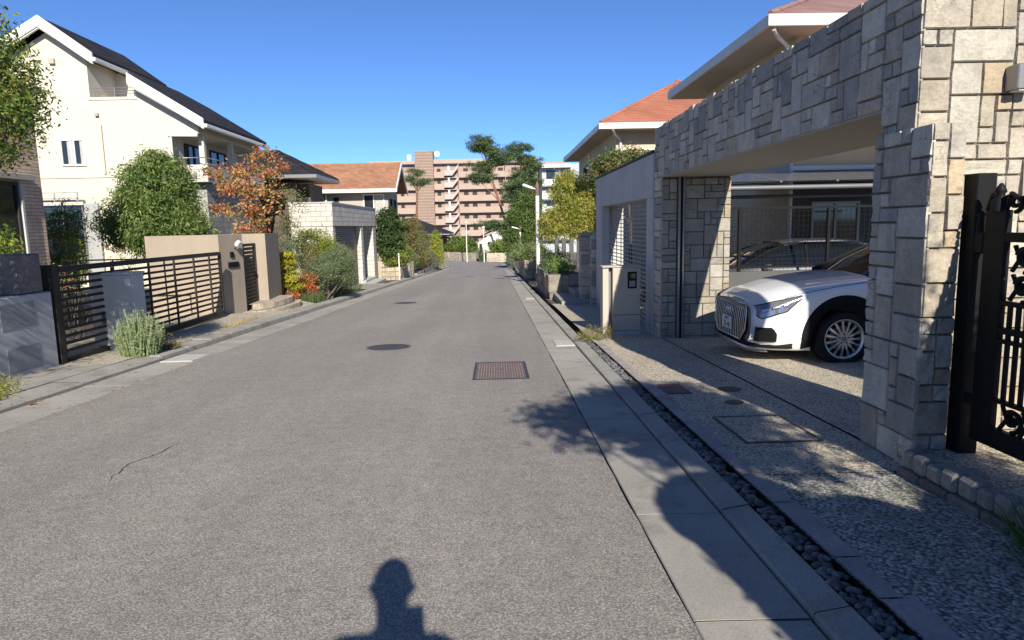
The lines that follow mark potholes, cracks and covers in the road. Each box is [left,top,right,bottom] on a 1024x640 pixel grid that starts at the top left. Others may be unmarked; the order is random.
utility cover [657,383,692,394]
utility cover [712,415,824,444]
